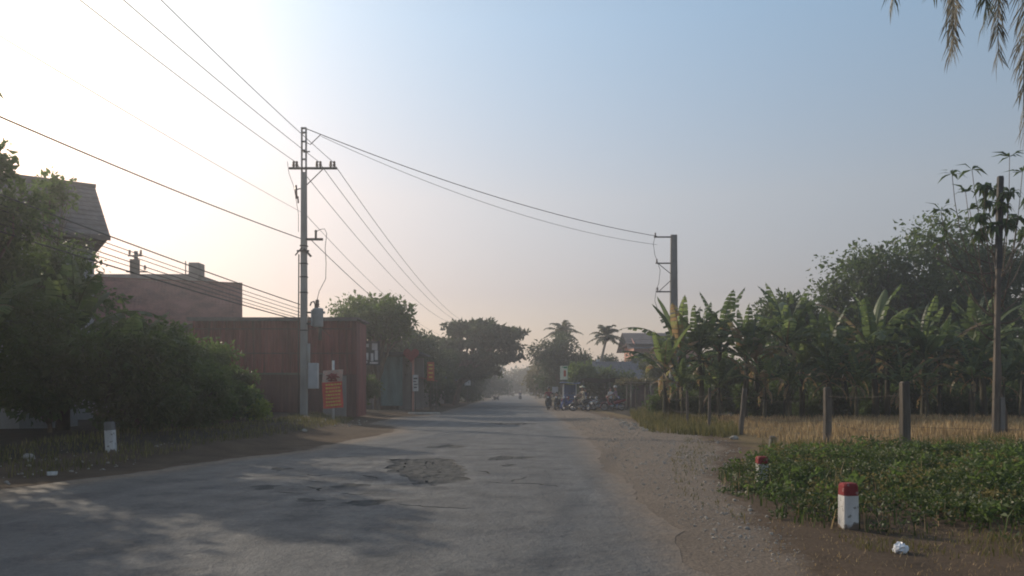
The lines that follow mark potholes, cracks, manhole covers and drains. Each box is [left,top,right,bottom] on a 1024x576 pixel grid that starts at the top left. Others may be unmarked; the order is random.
pothole [383,458,470,486]
